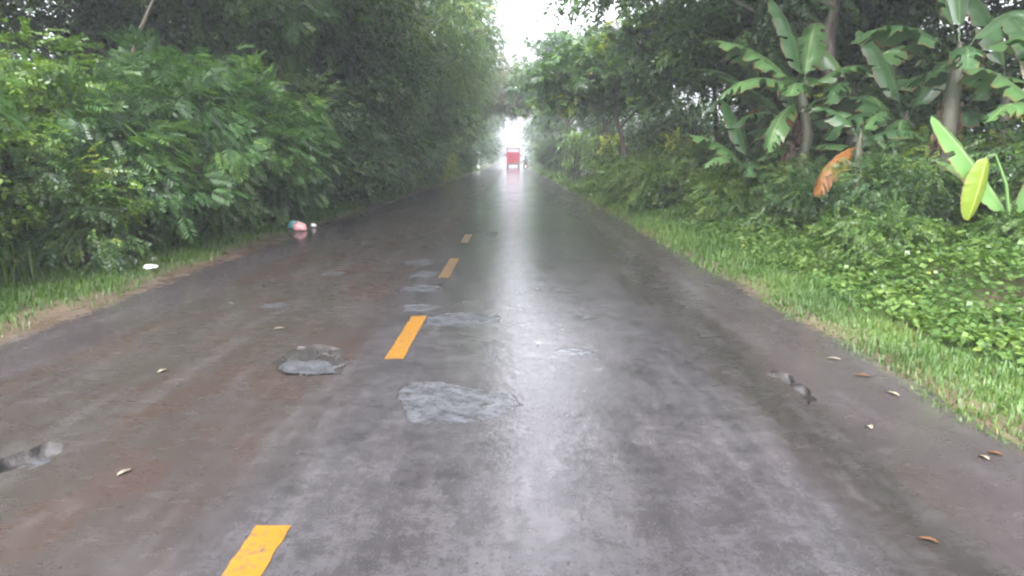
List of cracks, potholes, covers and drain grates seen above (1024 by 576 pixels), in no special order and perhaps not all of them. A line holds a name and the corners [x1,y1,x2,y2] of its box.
pothole [272,344,348,377]
pothole [397,381,524,424]
pothole [401,304,440,312]
pothole [424,313,501,327]
pothole [553,347,596,355]
pothole [766,369,817,405]
pothole [0,442,69,473]
